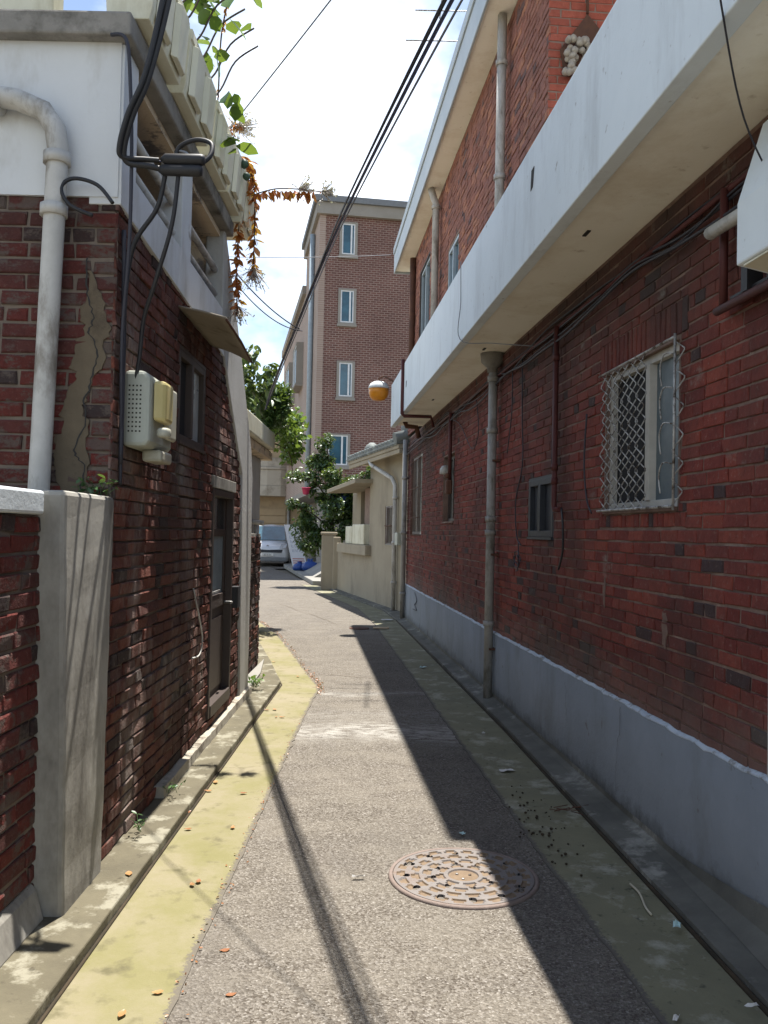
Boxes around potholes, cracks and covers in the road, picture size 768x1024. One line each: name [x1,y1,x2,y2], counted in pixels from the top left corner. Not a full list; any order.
manhole cover [388,847,539,910]
